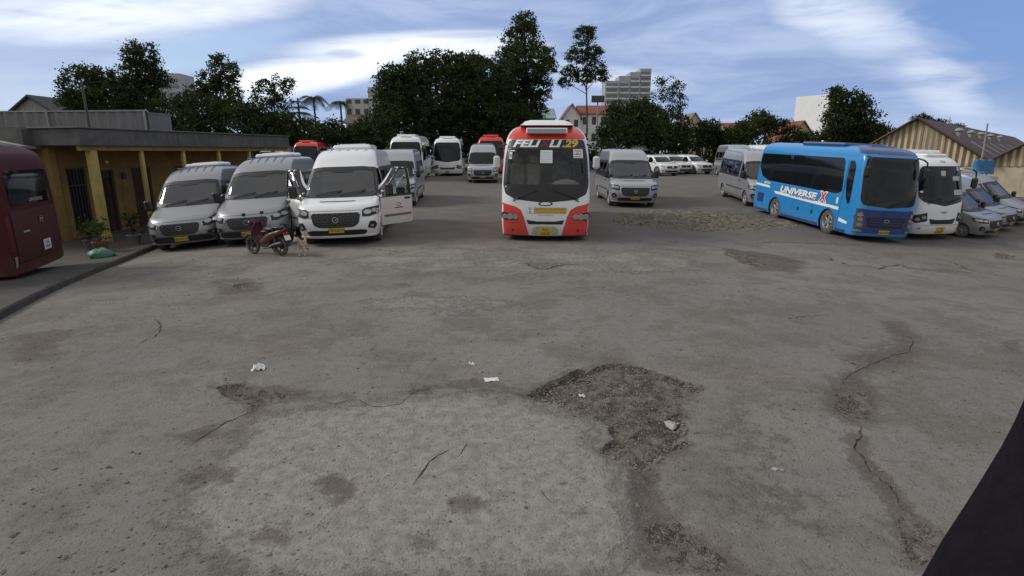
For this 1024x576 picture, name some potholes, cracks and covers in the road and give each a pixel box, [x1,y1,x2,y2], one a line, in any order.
crack [840,327,914,390]
pothole [643,515,730,573]
crack [853,424,902,509]
crack [191,411,252,446]
crack [829,252,1017,279]
crack [314,389,427,407]
pothole [526,364,704,471]
crack [414,444,467,483]
pothole [830,392,874,422]
